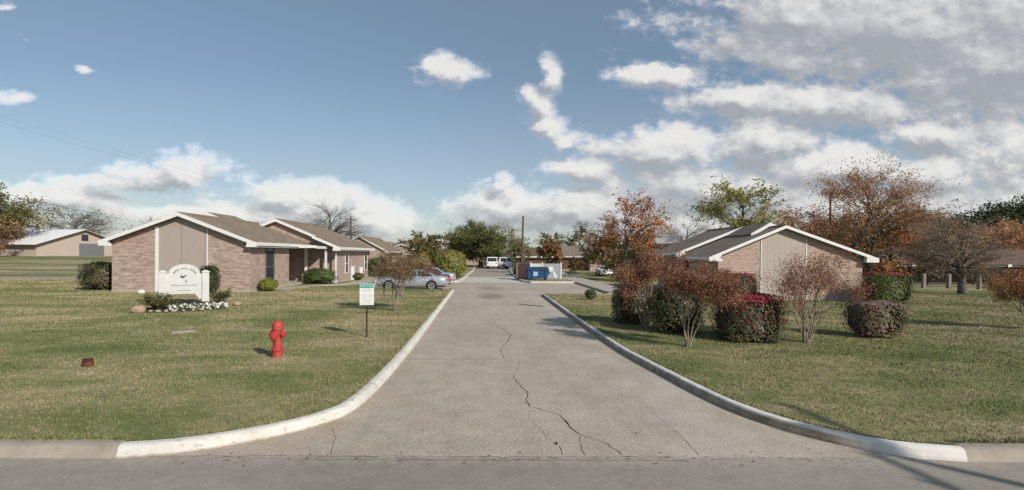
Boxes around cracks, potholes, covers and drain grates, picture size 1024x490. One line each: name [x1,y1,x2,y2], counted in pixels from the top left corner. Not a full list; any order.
crack [298,321,699,461]
